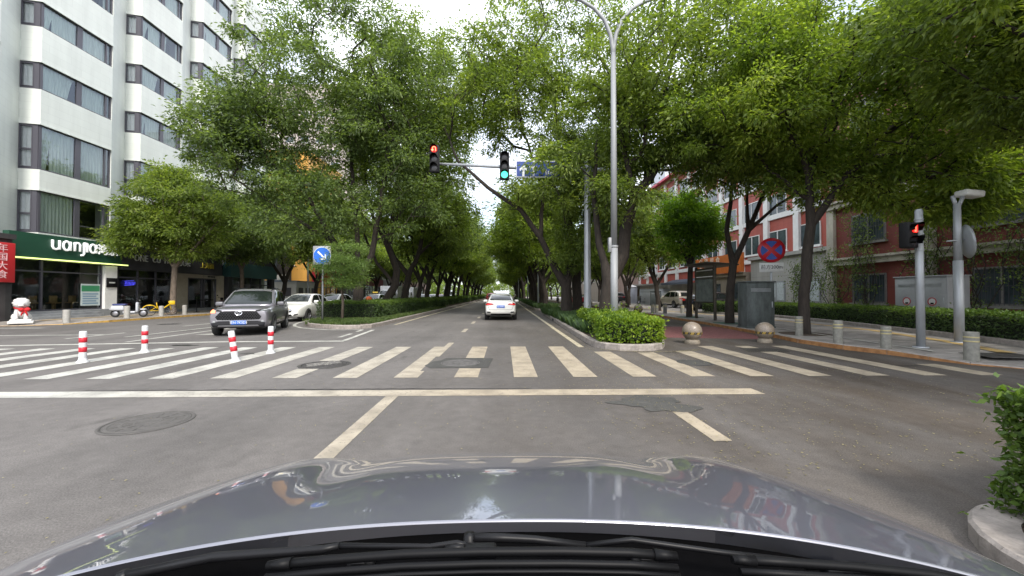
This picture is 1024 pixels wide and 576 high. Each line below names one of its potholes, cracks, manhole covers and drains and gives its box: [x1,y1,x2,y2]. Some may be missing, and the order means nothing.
manhole cover [297,360,352,369]
manhole cover [94,411,196,435]
